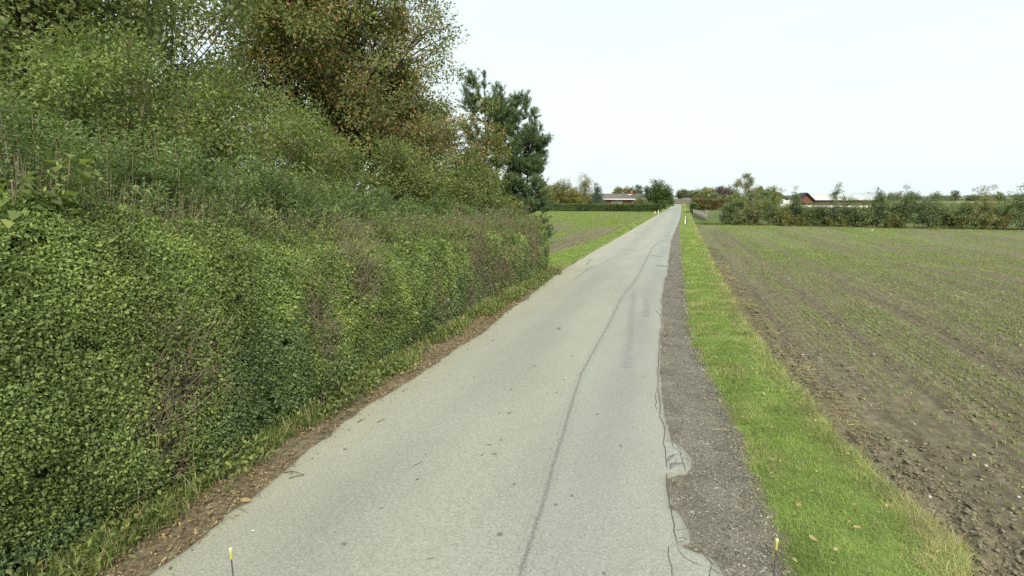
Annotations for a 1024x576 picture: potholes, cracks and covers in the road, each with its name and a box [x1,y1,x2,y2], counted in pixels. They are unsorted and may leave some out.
crack [655,317,721,576]
